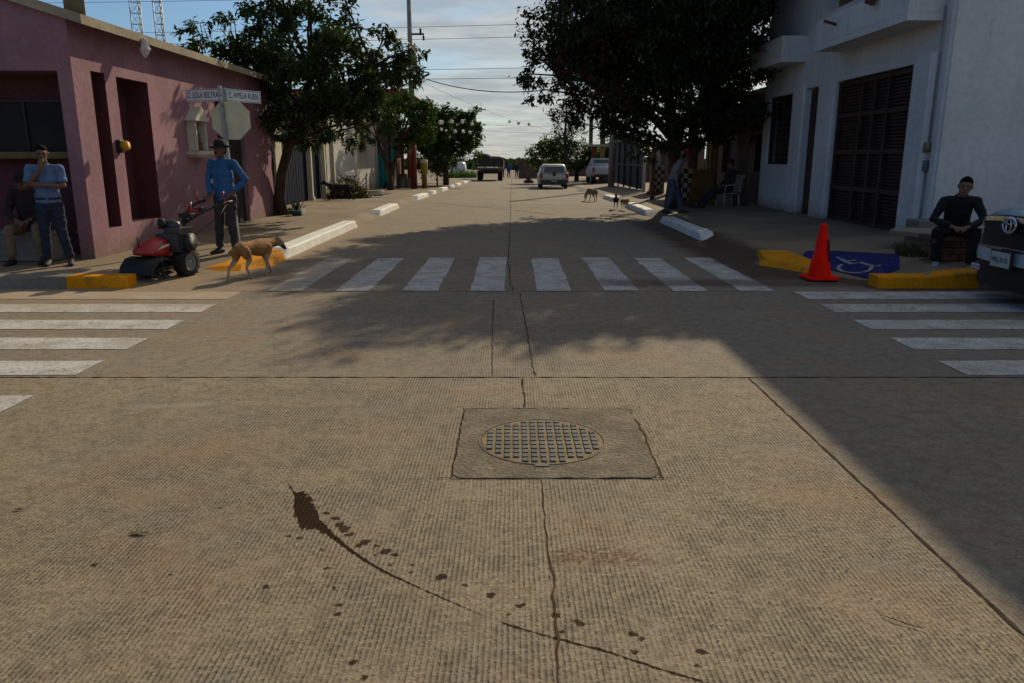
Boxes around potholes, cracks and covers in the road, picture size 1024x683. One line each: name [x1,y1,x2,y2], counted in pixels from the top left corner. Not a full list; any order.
crack [491,261,536,408]
manhole cover [442,408,662,478]
crack [627,407,664,479]
crack [540,479,561,683]
